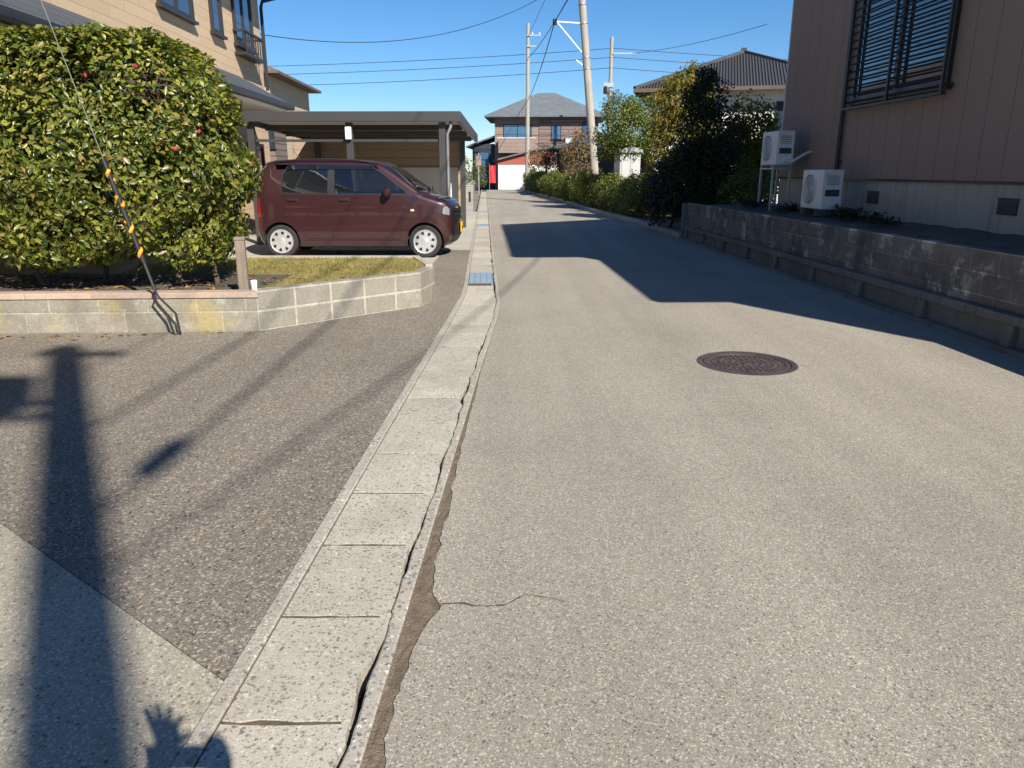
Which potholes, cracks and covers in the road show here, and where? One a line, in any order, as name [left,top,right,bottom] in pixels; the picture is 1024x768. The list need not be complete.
crack [438,594,561,607]
manhole cover [696,351,798,376]
drain grate [469,272,493,286]
